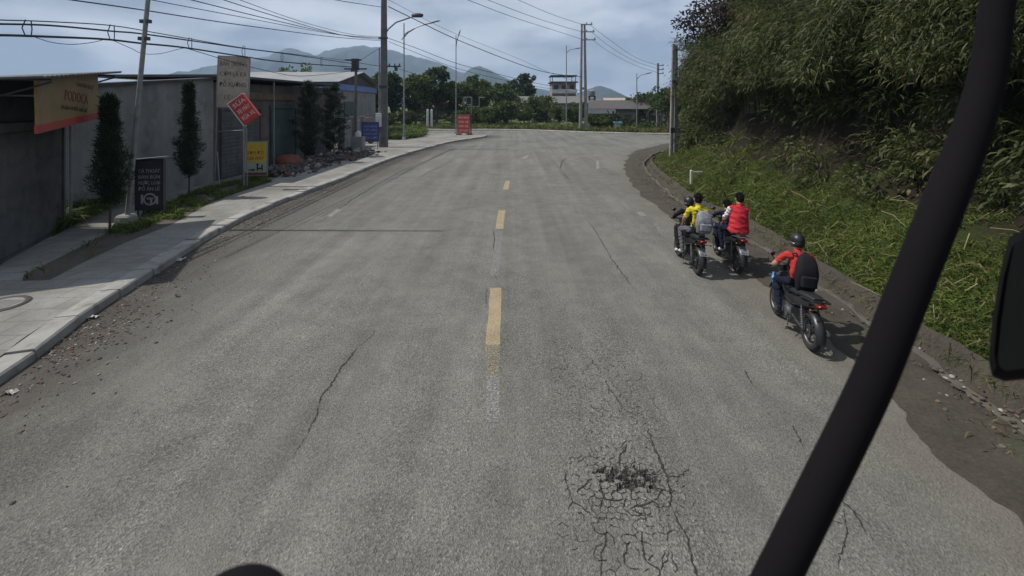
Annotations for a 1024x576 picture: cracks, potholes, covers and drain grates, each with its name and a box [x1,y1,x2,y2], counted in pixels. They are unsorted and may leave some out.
pothole [599,466,660,492]
crack [833,502,871,567]
crack [530,332,697,576]
crack [294,337,371,454]
manhole cover [0,295,33,311]
